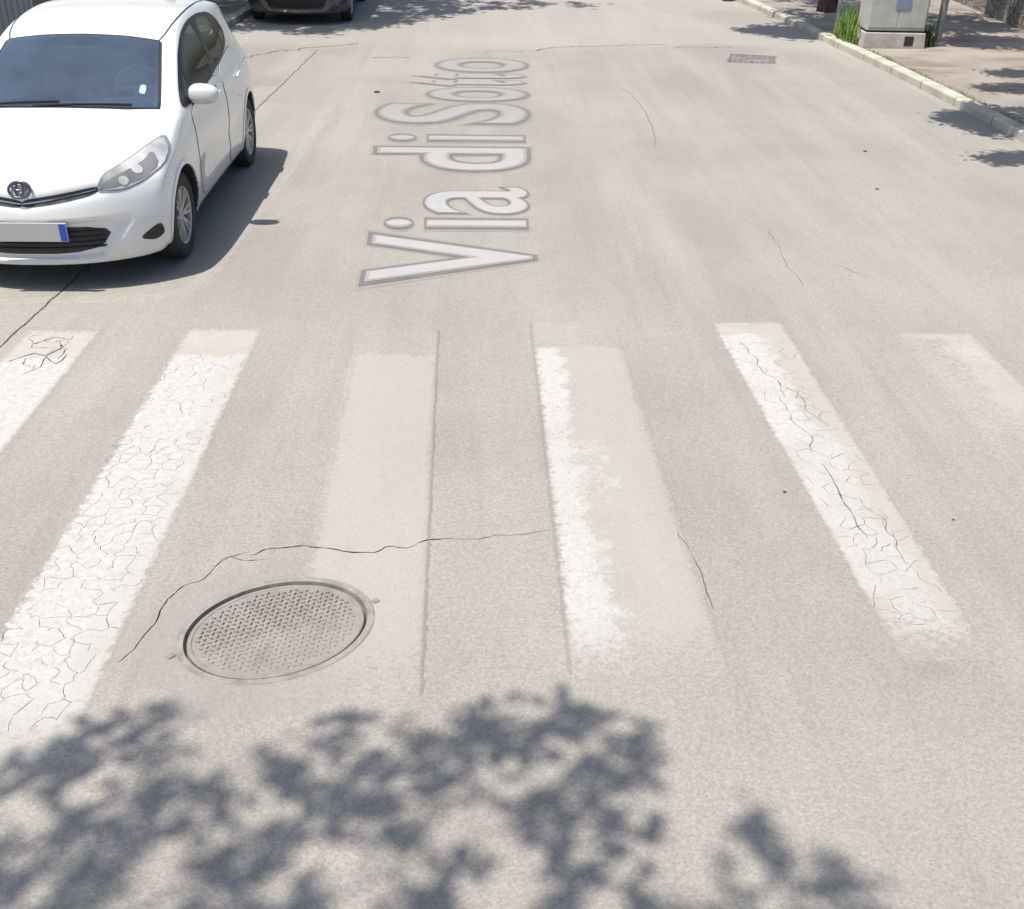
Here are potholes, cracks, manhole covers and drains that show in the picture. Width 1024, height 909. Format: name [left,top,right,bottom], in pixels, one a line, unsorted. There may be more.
manhole cover [166,577,380,686]
crack [8,337,73,373]
crack [1,354,547,731]
crack [677,533,713,609]
crack [741,343,941,625]
crack [246,43,410,58]
